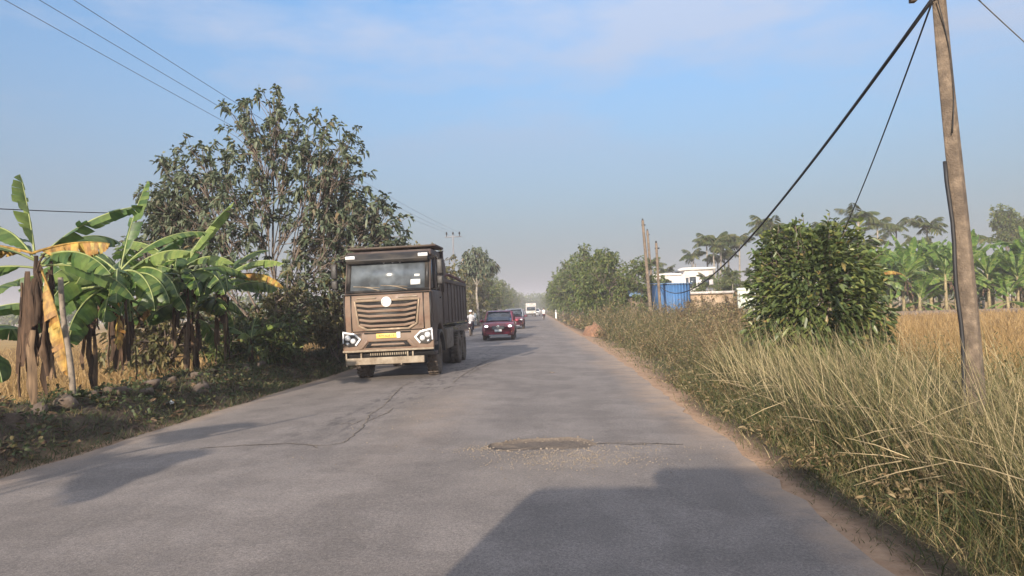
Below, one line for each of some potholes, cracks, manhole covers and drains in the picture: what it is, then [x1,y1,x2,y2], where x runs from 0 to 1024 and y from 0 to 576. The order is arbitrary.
pothole [486,436,597,452]
crack [198,377,422,448]
